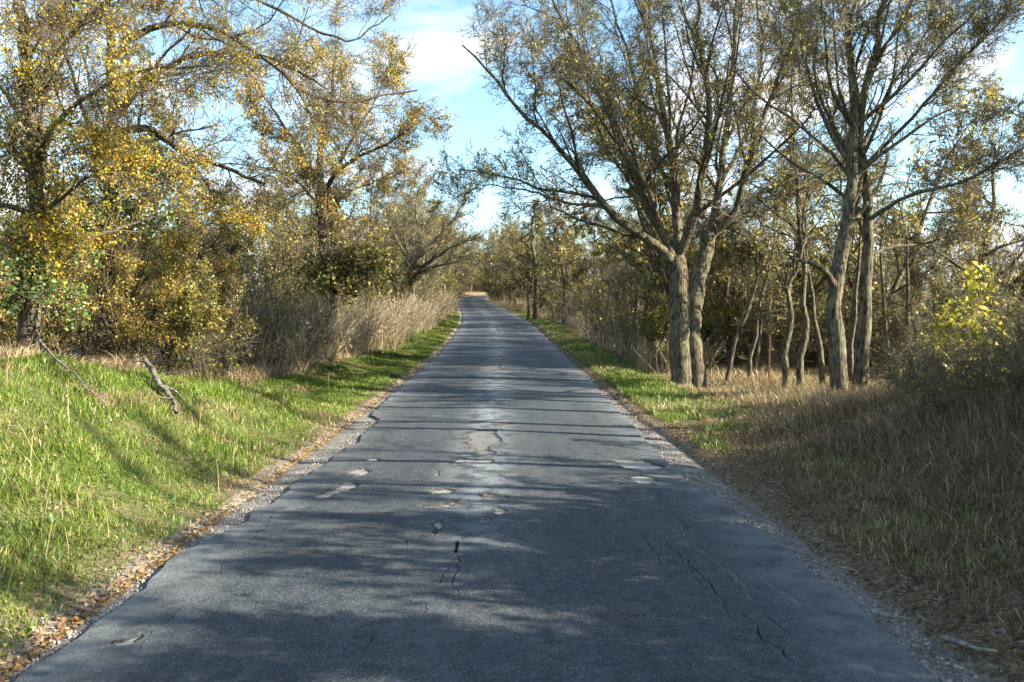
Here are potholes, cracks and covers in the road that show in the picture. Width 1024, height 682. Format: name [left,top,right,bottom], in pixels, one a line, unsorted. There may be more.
pothole [477,492,509,500]
pothole [109,634,144,646]
pothole [464,429,504,455]
crack [639,517,843,660]
pothole [312,480,360,499]
pothole [612,458,667,472]
pothole [345,467,373,477]
pothole [430,519,446,535]
crack [403,554,476,613]
pothole [490,507,508,516]
pothole [625,474,660,484]
